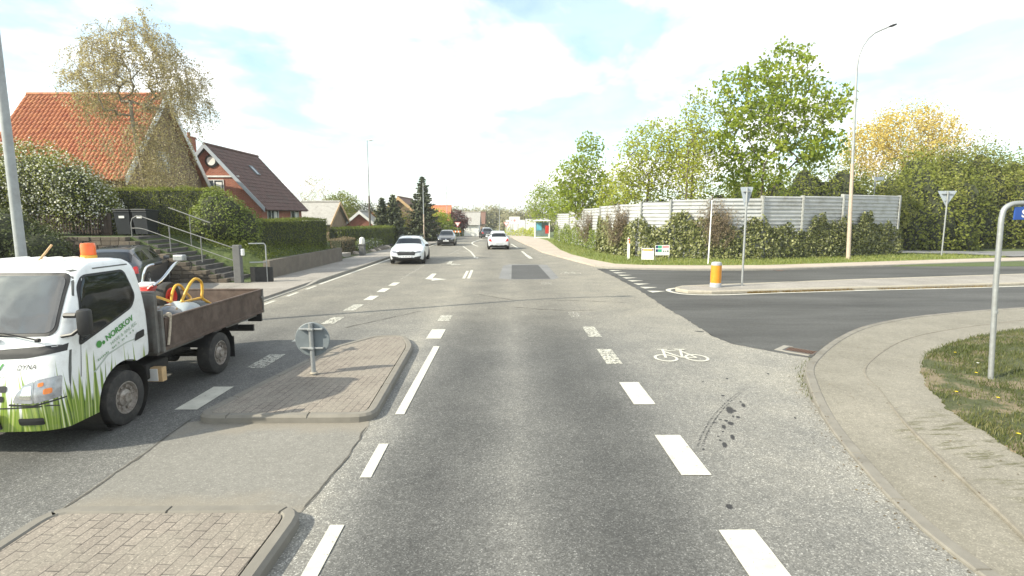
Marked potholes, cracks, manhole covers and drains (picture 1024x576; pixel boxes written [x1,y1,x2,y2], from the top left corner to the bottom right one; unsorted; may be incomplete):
drain grate [774,345,819,356]
